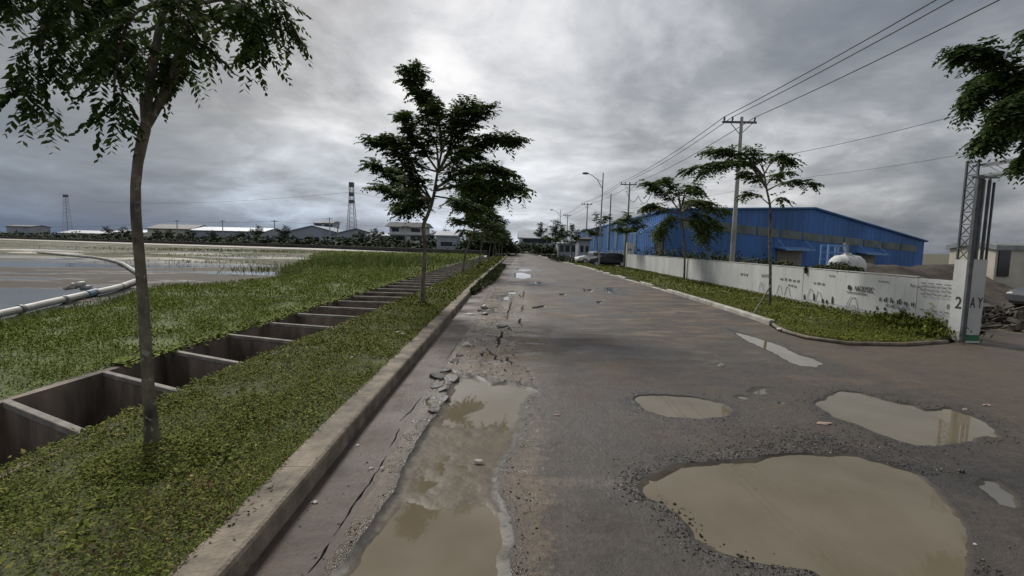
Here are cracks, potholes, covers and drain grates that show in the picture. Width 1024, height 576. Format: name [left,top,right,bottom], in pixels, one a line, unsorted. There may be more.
pothole [331,375,539,576]
pothole [813,390,1004,447]
pothole [632,394,733,419]
pothole [727,328,825,367]
pothole [635,452,978,576]
crack [480,291,526,366]
crack [307,344,457,574]
pothole [972,478,1024,510]
